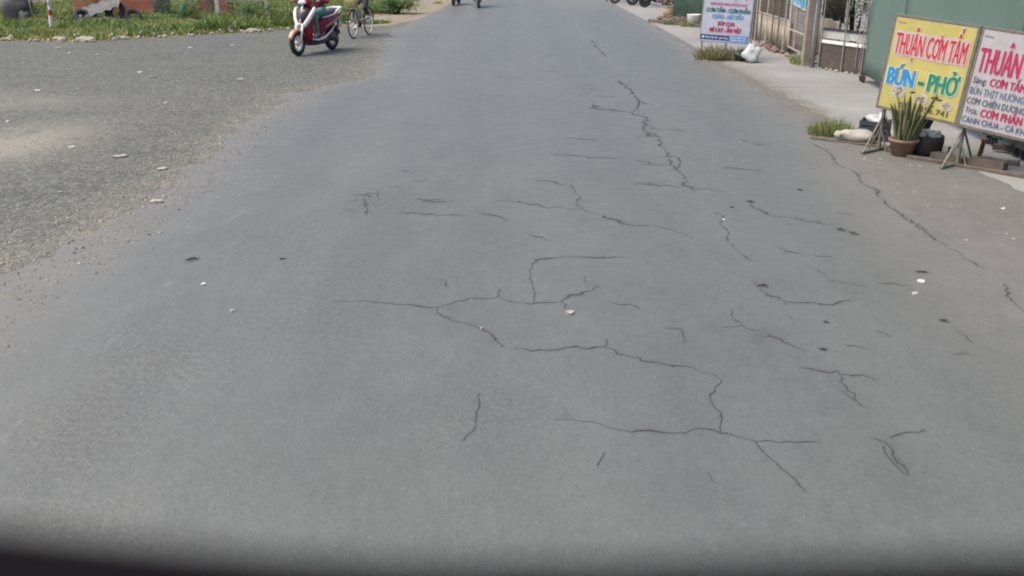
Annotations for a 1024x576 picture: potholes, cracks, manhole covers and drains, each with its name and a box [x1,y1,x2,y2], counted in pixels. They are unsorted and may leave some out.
crack [518,339,816,491]
crack [748,201,850,225]
crack [723,256,862,350]
crack [346,256,624,346]
crack [874,430,923,476]
crack [806,368,873,406]
crack [592,81,714,191]
crack [811,143,982,268]
crack [345,192,380,214]
